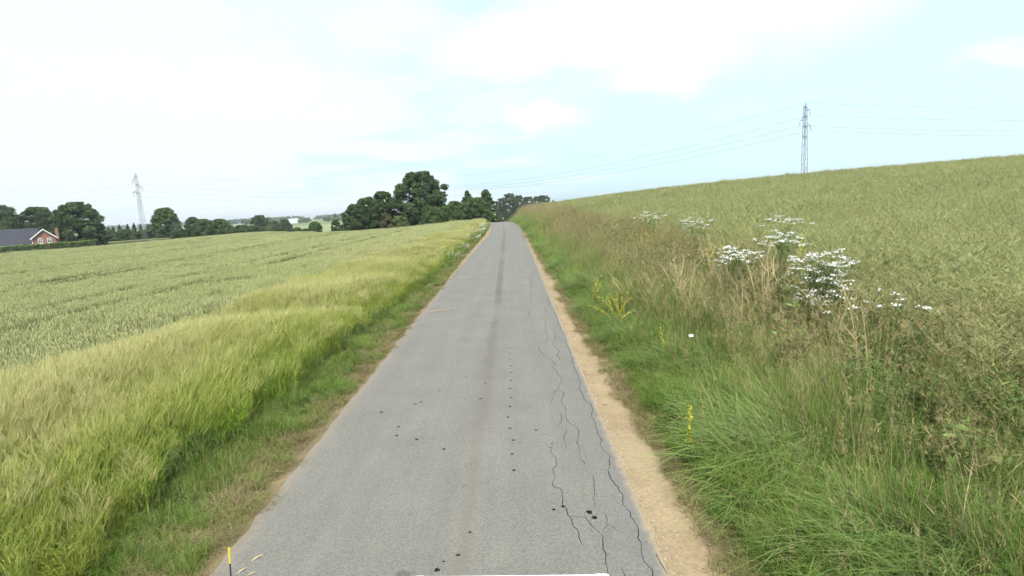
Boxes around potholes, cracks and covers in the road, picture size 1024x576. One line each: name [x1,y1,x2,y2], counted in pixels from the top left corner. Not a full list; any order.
crack [530,280,667,576]
